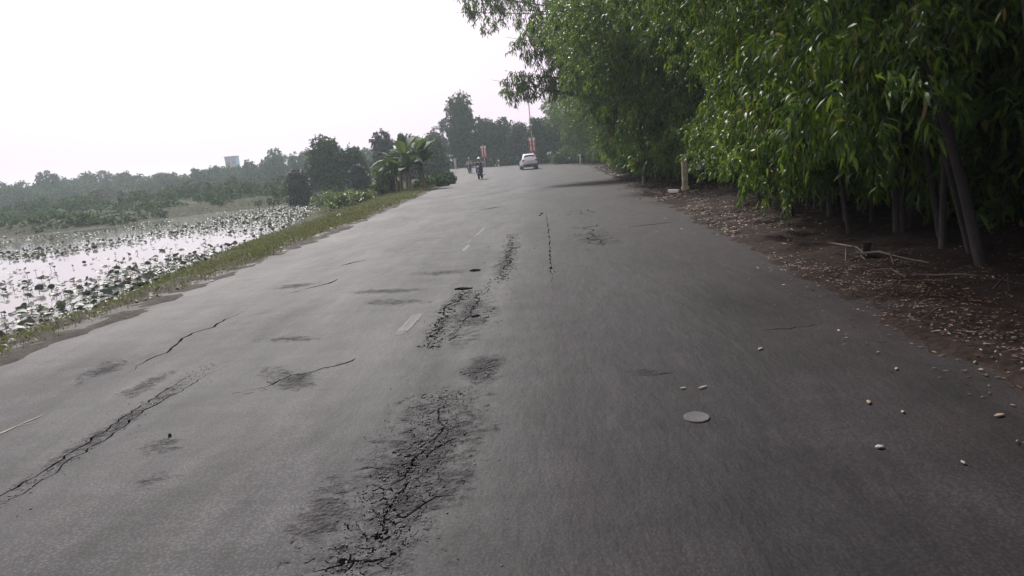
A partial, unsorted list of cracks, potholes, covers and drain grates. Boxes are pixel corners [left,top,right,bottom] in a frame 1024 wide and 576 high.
crack [277,377,519,576]
crack [232,358,356,396]
crack [128,314,238,373]
crack [415,233,521,349]
crack [539,209,618,283]
crack [0,363,221,517]
